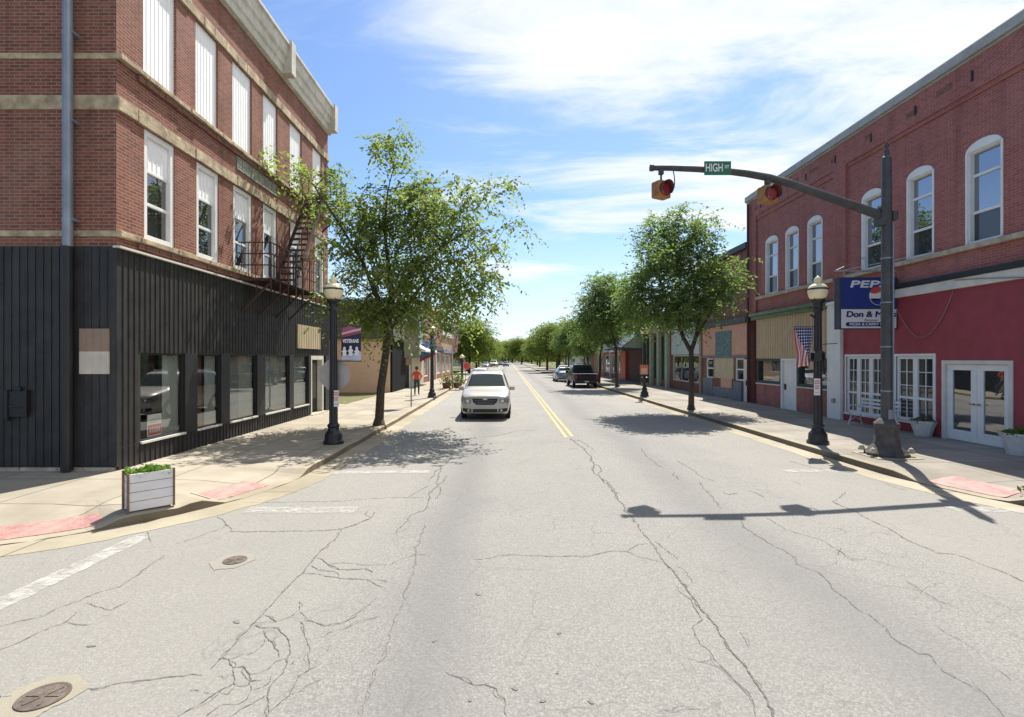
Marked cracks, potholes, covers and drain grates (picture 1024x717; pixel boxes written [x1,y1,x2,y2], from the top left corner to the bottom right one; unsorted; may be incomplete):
crack [484,439,774,717]
crack [832,493,1022,581]
crack [90,554,415,717]
crack [186,458,451,541]
crack [741,520,1005,717]
manhole cover [209,552,256,570]
manhole cover [0,674,89,717]
